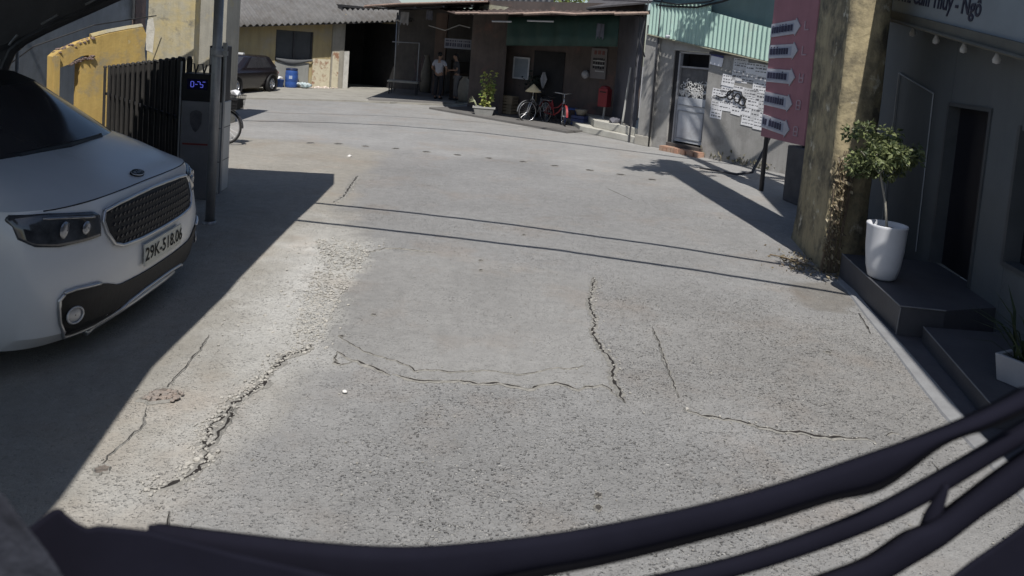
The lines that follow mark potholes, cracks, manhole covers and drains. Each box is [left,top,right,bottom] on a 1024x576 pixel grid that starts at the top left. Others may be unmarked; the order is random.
crack [332,277,626,403]
crack [652,327,899,442]
pothole [134,387,184,405]
crack [333,176,360,202]
crack [103,335,312,492]
